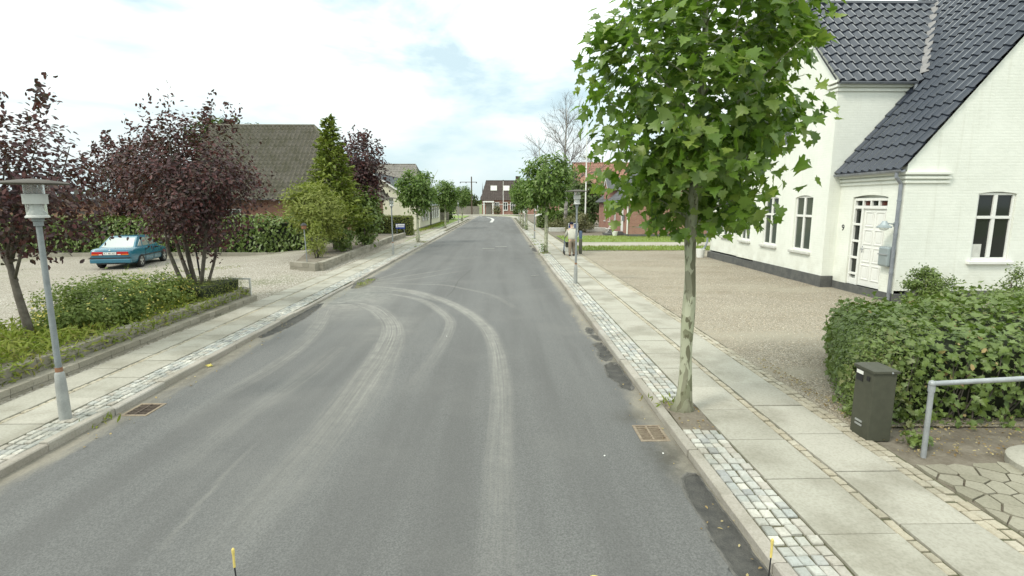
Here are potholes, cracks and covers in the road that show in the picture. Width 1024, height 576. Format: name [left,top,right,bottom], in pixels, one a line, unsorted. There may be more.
drain grate [121,403,167,416]
drain grate [632,425,671,442]
